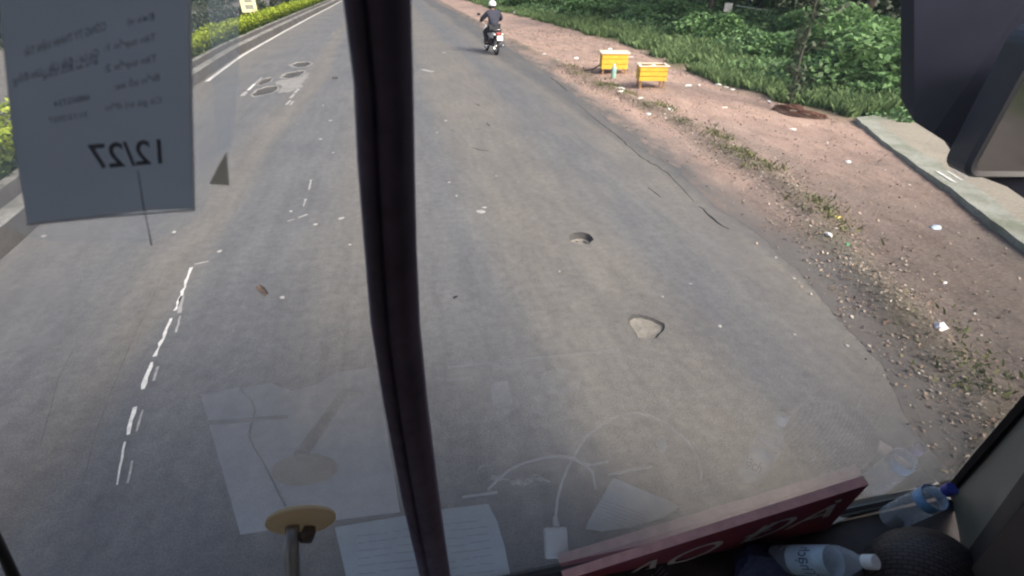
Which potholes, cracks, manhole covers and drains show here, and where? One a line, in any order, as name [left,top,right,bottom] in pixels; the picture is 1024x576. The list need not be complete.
pothole [279,70,306,79]
pothole [569,232,594,245]
pothole [250,85,280,97]
pothole [627,314,665,339]
crack [581,107,729,229]
